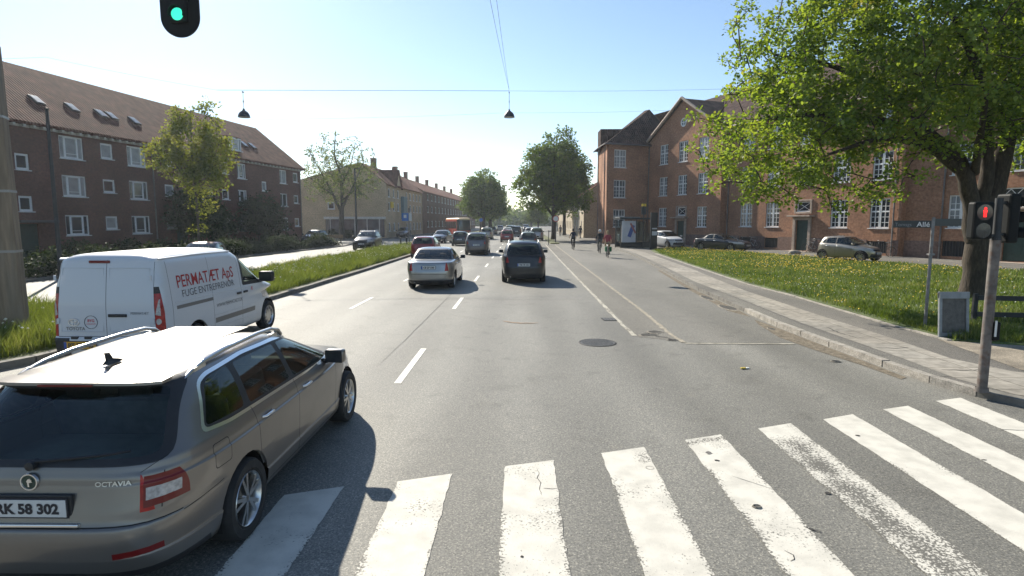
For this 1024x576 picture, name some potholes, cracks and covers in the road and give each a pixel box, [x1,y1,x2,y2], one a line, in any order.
manhole cover [578,339,617,347]
